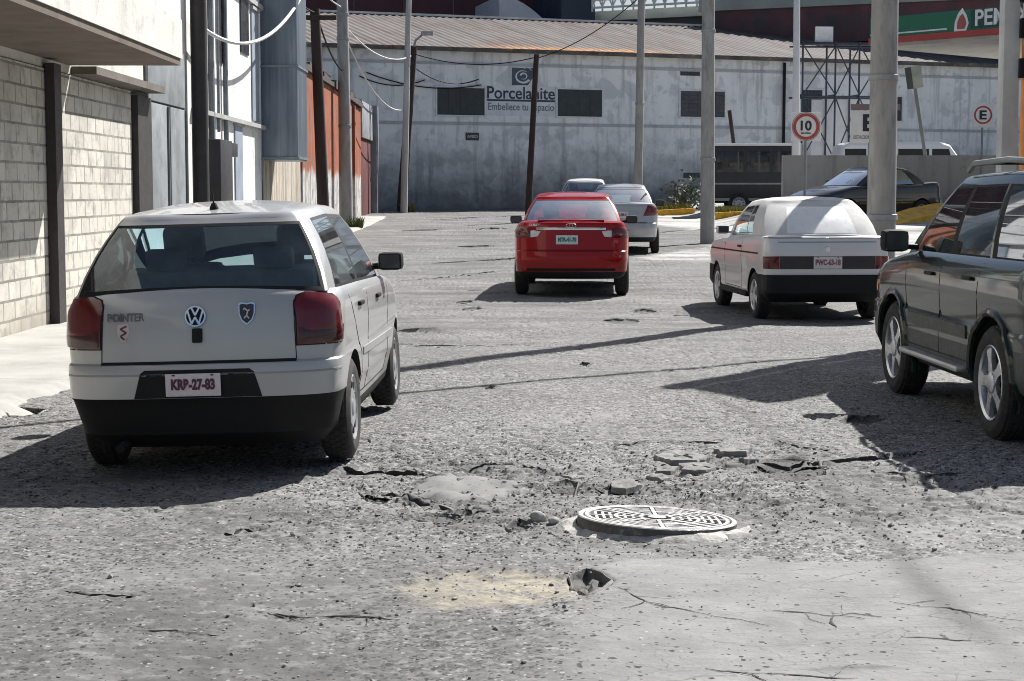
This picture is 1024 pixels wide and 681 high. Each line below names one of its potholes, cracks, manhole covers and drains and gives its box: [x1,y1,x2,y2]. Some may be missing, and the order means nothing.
crack [260,611,400,625]
crack [335,462,561,517]
manhole cover [561,505,753,544]
pothole [567,568,614,596]
crack [57,590,131,600]
crack [705,664,856,681]
crack [619,587,769,626]
pothole [752,455,832,483]
crack [784,600,1022,628]
